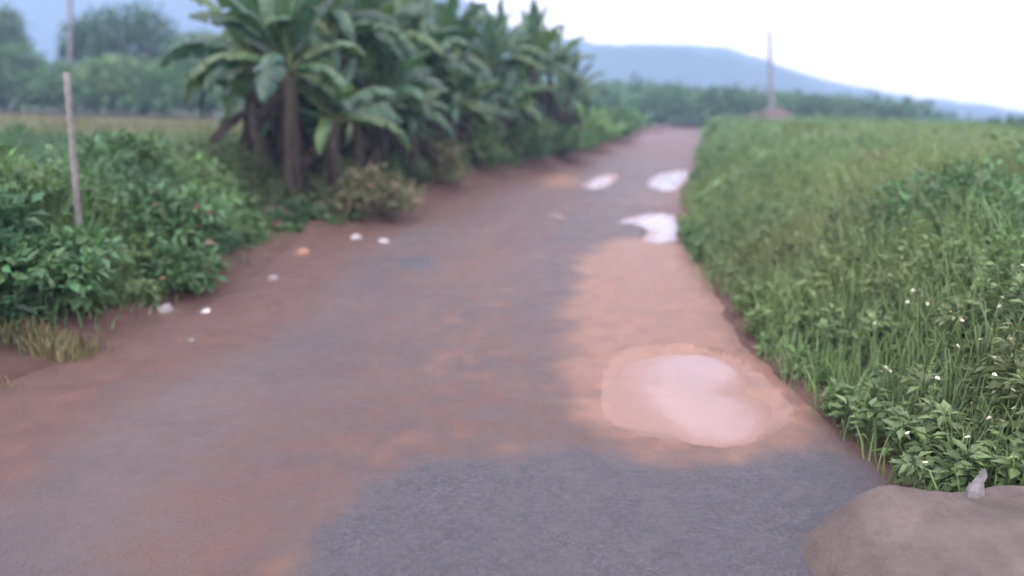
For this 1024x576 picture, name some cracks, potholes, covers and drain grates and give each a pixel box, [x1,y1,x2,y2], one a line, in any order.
pothole [646,168,692,191]
pothole [580,172,623,189]
pothole [617,210,679,243]
pothole [601,343,795,448]
